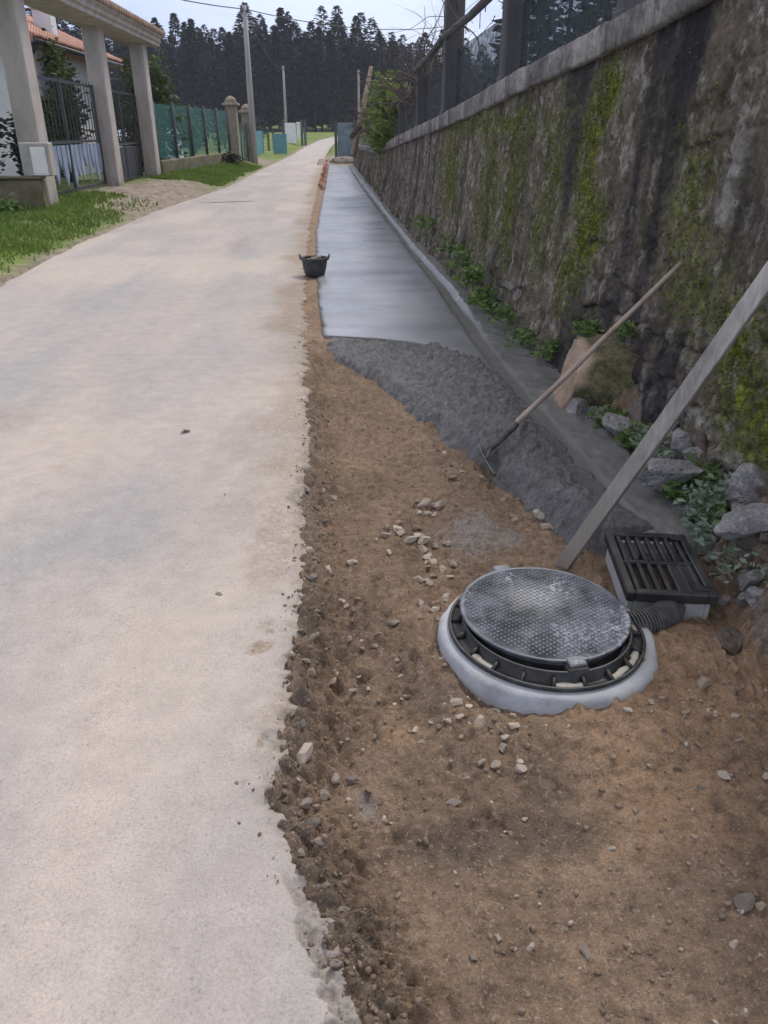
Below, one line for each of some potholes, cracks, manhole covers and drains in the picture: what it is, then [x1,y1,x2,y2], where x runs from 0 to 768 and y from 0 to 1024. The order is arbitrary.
manhole cover [437,564,658,716]
drain grate [604,531,719,621]
